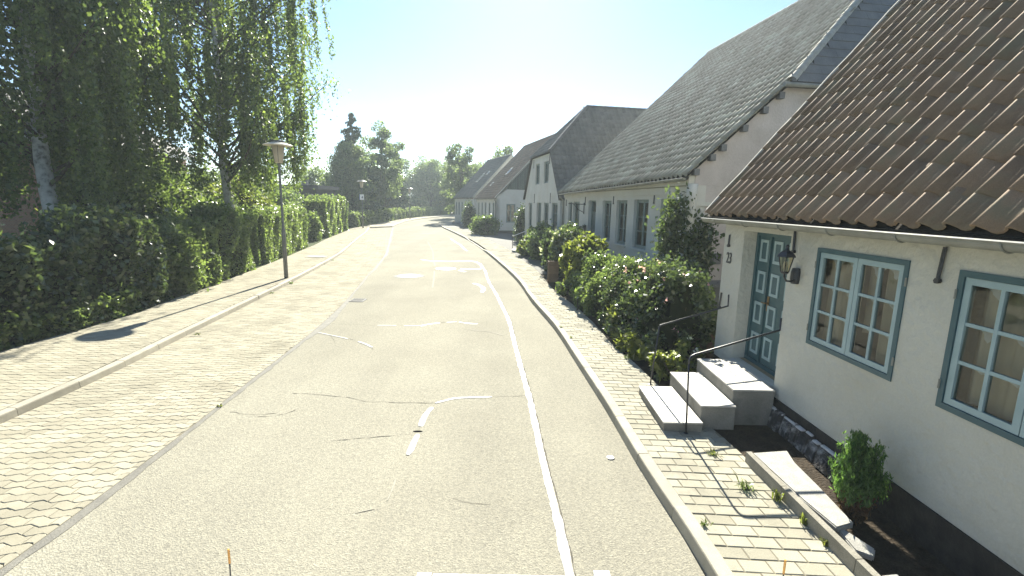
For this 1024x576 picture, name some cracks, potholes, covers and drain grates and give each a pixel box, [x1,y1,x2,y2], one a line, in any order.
crack [239,393,492,417]
